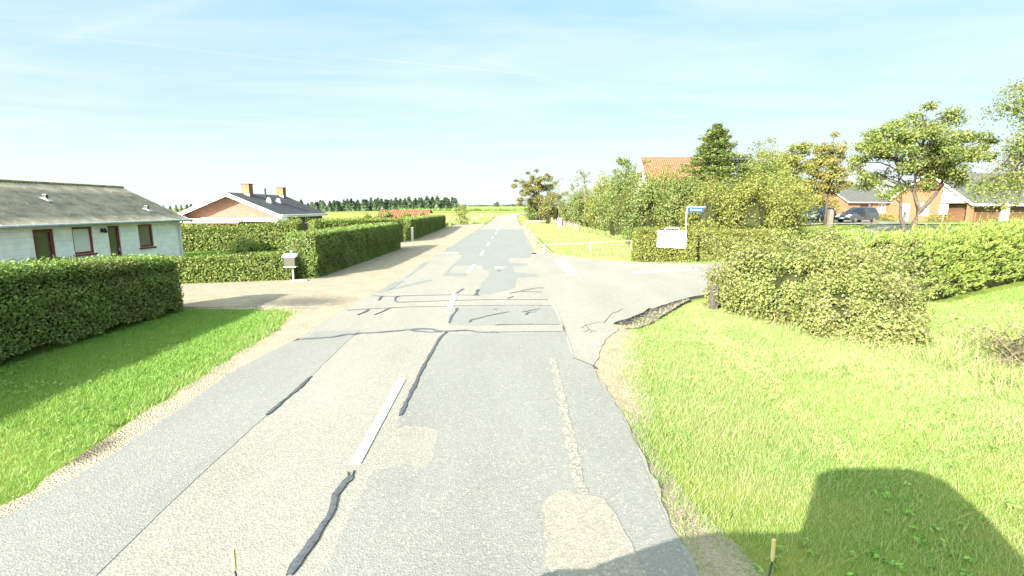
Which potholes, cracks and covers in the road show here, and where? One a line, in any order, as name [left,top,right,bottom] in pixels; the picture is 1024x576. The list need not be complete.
crack [347,288,551,315]
